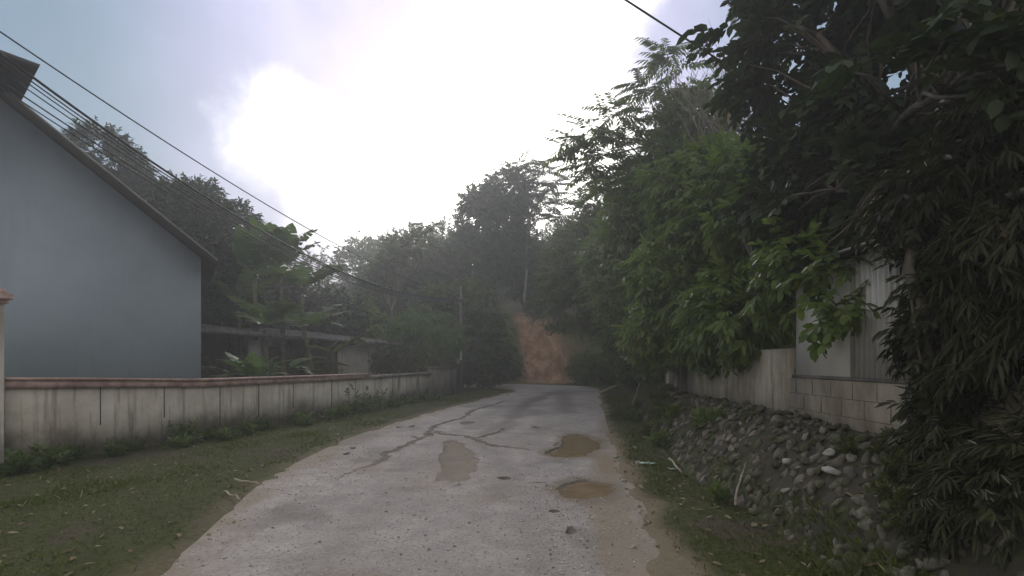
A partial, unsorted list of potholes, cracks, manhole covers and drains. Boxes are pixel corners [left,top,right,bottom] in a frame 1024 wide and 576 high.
crack [337,399,532,480]
pothole [554,480,616,500]
pothole [434,440,480,483]
pothole [544,434,603,458]
